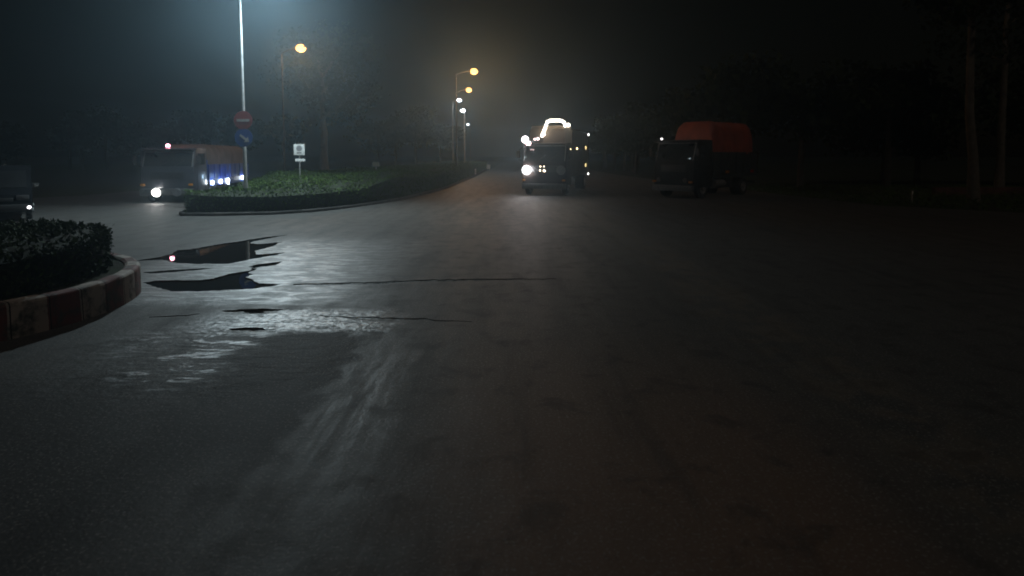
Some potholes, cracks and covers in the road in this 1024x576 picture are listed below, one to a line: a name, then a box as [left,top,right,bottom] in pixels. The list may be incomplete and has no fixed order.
pothole [137,235,285,264]
pothole [143,268,279,291]
